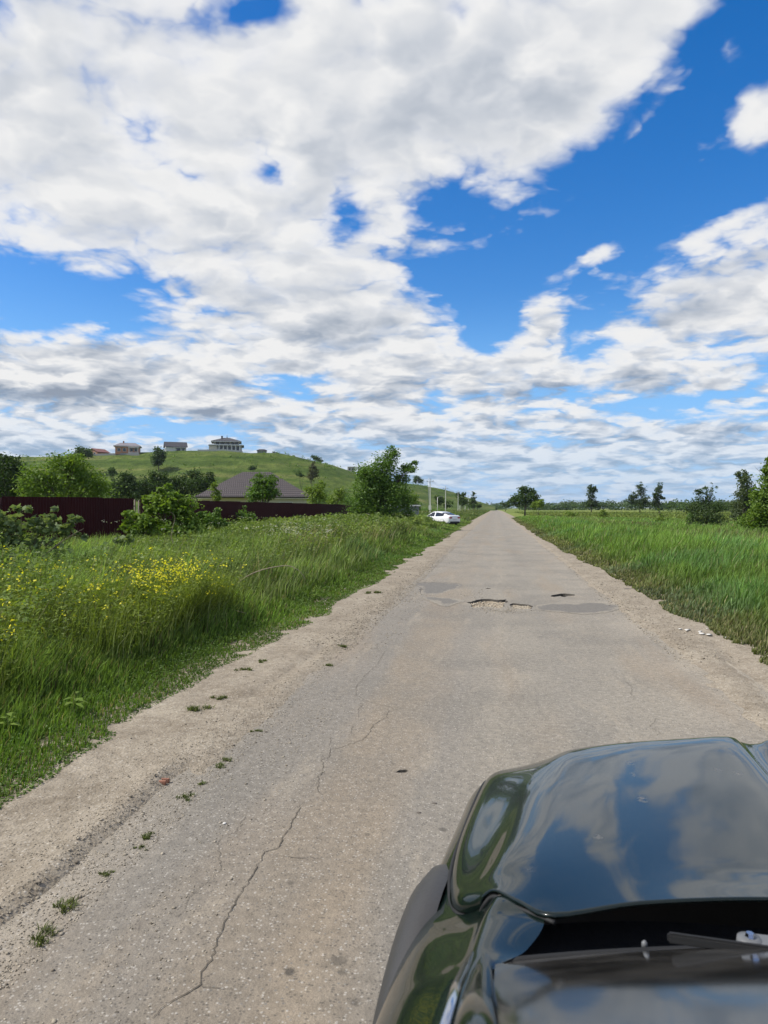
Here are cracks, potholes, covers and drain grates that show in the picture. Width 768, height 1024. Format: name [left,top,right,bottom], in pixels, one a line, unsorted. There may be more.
crack [317,658,392,798]
crack [153,804,320,1017]
pothole [467,599,508,608]
